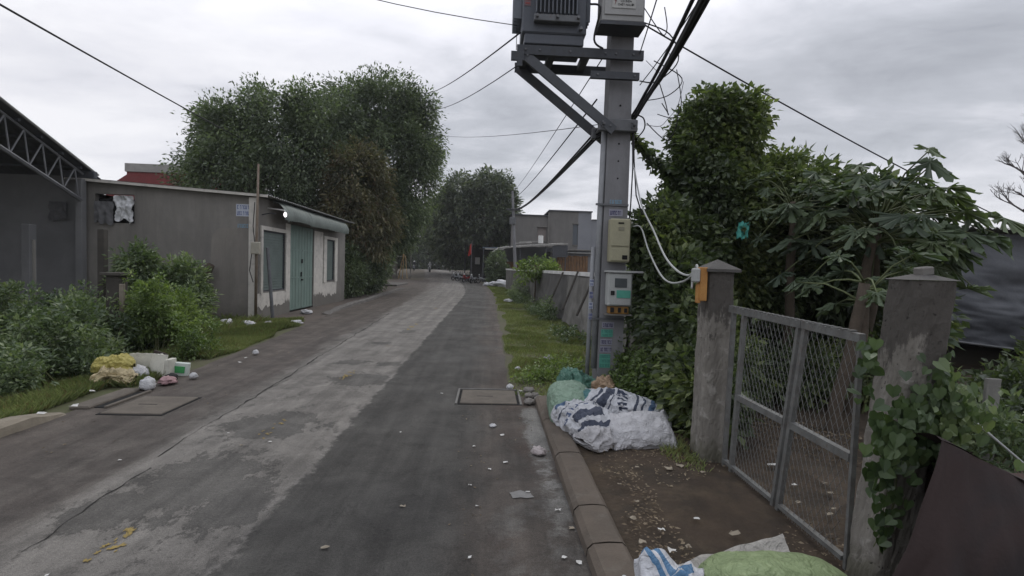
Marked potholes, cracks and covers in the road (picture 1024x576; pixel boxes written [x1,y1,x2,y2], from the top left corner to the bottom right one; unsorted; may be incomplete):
manhole cover [95,396,202,416]
manhole cover [455,388,522,406]
